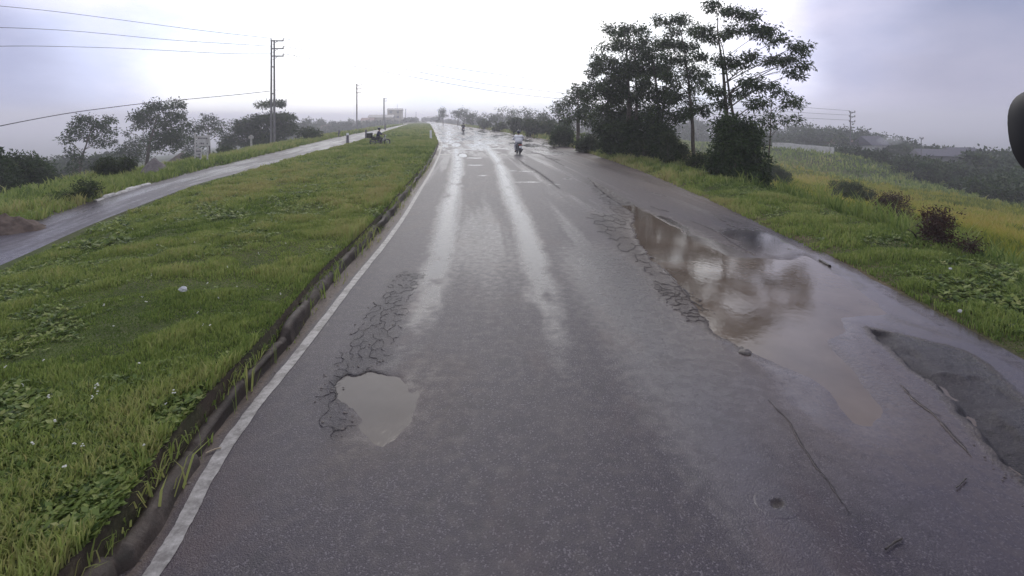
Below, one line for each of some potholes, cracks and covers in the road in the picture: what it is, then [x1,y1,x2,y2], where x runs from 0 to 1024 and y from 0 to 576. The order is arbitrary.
crack [316,271,423,436]
pothole [326,367,420,447]
crack [586,179,707,322]
pothole [754,488,801,519]
crack [900,384,972,457]
crack [770,401,850,513]
pothole [585,177,886,427]
